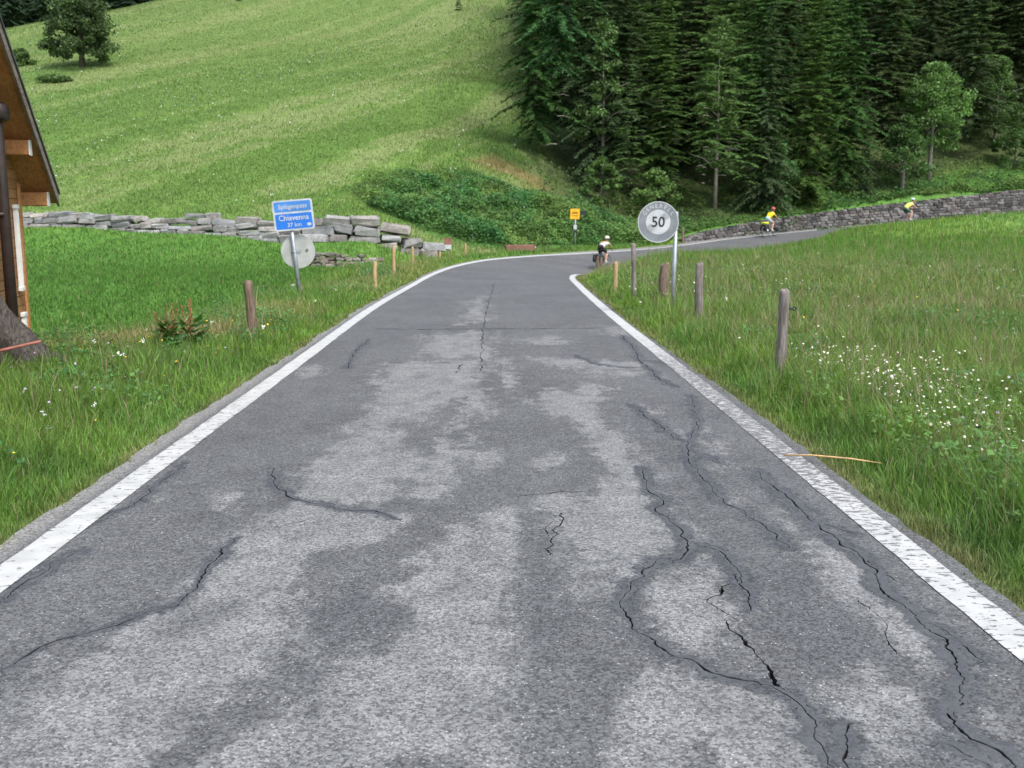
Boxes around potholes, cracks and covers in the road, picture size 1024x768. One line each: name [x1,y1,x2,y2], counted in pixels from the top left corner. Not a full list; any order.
crack [637,468,697,563]
crack [261,467,400,529]
crack [345,339,370,369]
crack [545,513,564,555]
crack [706,574,862,768]
crack [1,537,236,671]
crack [859,602,903,657]
